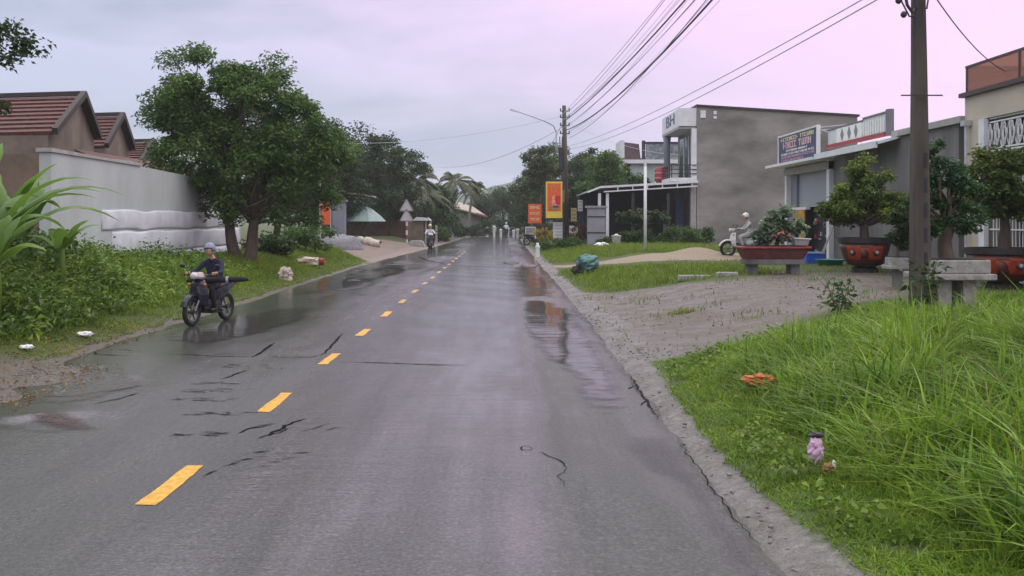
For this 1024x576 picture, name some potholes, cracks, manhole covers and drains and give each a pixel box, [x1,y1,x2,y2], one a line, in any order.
pothole [37,412,89,429]
crack [170,335,341,476]
